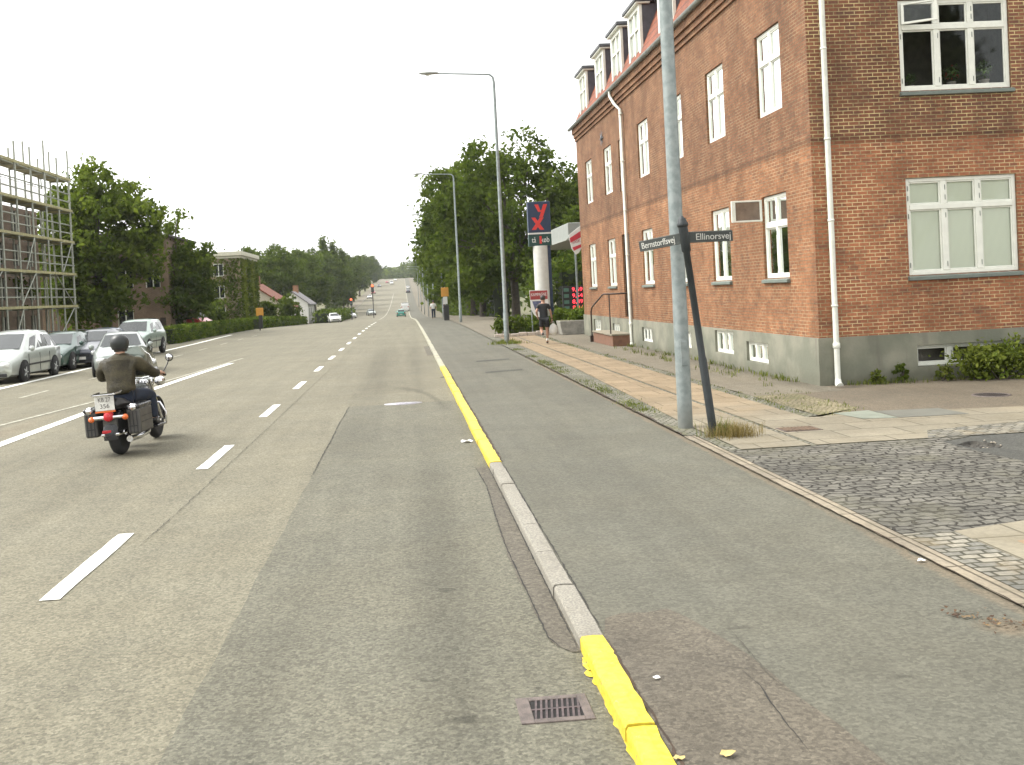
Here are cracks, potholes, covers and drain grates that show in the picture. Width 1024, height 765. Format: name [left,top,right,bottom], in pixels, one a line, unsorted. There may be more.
drain grate [515,693,596,725]
crack [710,626,810,752]
